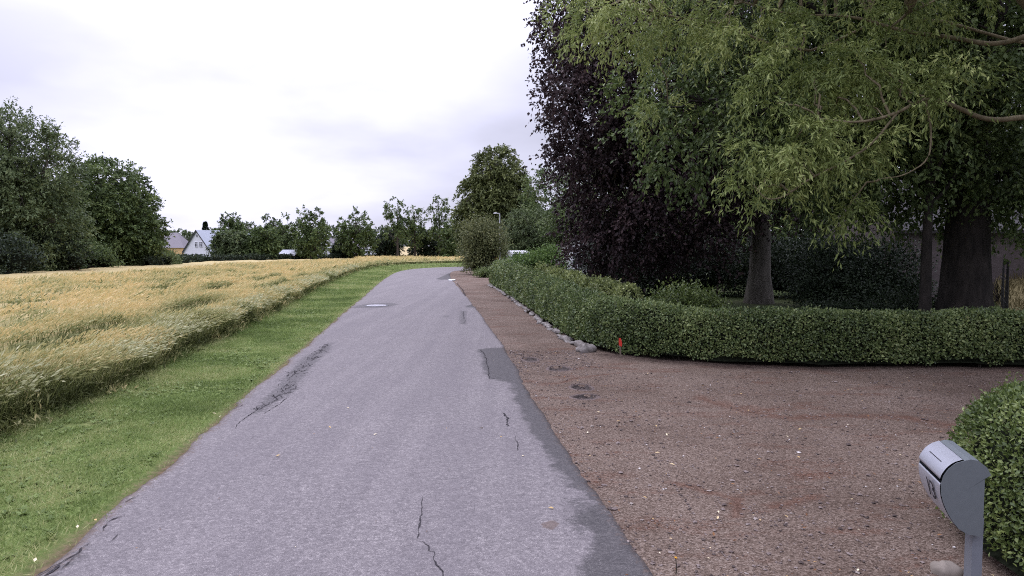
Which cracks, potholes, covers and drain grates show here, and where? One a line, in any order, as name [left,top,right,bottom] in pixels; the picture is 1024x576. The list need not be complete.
crack [417,496,444,576]
crack [36,497,134,576]
pothole [568,383,595,391]
crack [234,344,329,437]
